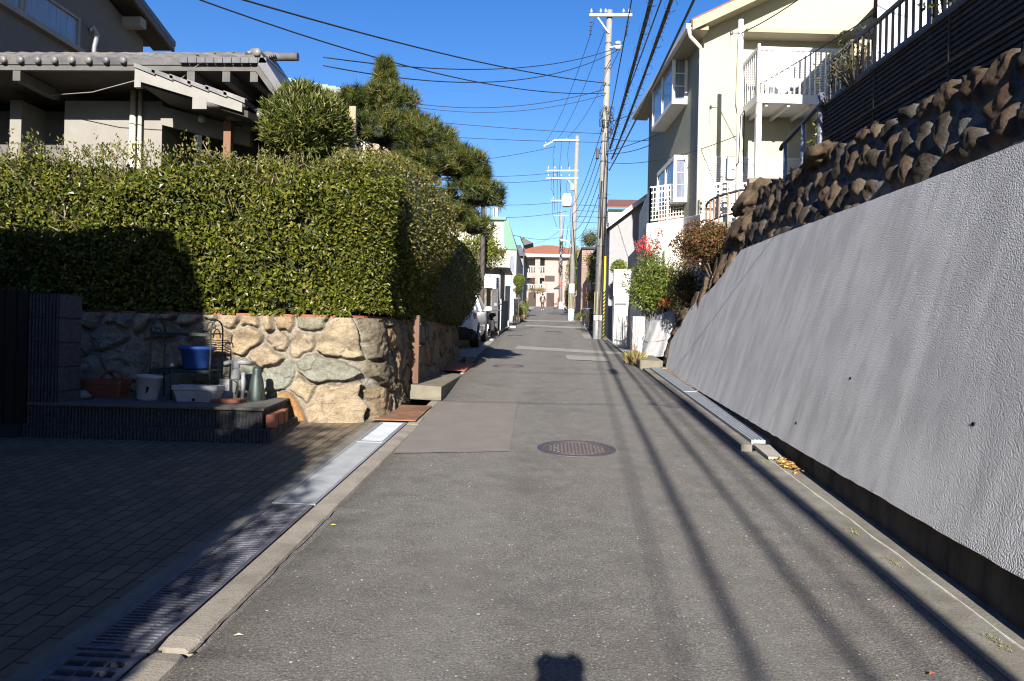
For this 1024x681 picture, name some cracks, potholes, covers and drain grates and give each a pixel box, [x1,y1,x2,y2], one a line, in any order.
drain grate [355,422,407,443]
drain grate [272,441,385,507]
drain grate [31,649,147,681]
manhole cover [537,440,616,457]
